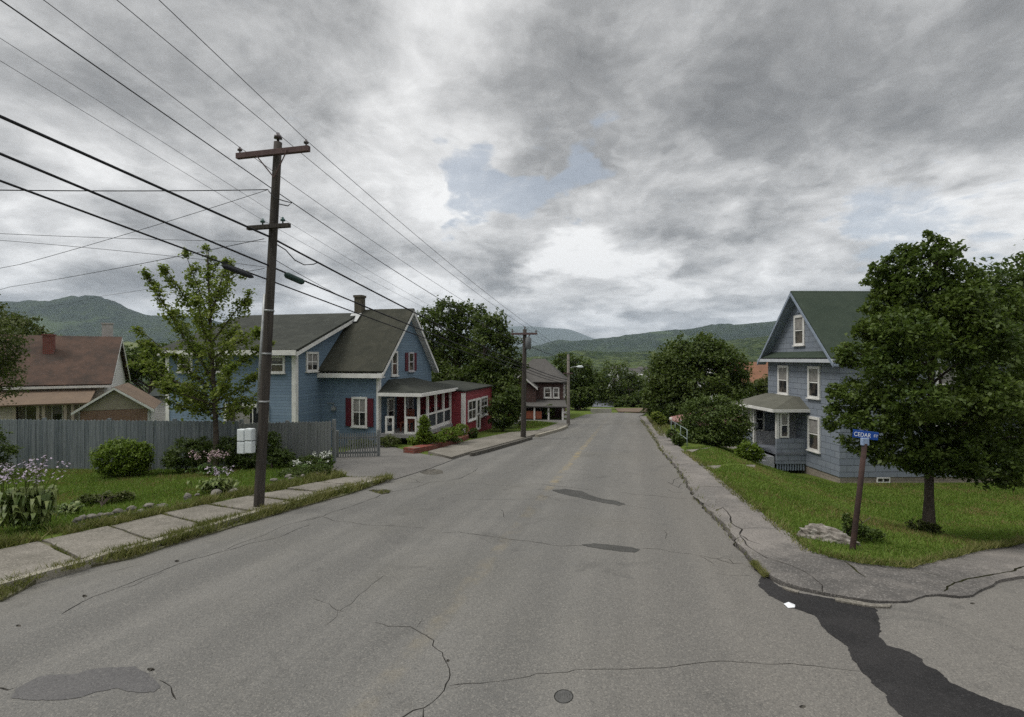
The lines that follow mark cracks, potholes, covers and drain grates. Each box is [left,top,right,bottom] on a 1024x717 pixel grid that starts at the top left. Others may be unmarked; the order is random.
crack [373,620,861,717]
crack [923,566,1024,591]
manhole cover [554,689,574,704]
